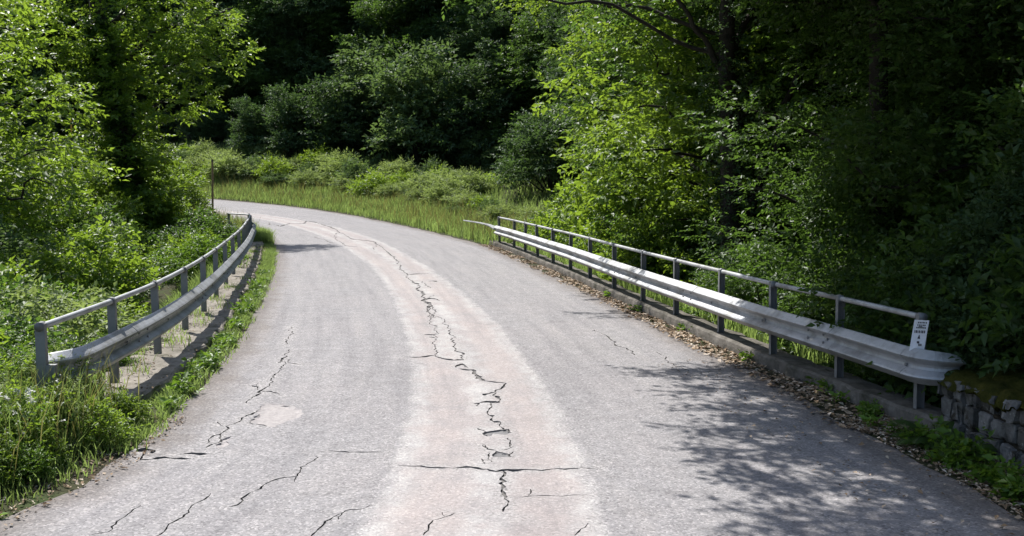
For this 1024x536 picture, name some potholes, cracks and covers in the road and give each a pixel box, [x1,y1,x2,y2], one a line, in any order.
crack [311,505,370,536]
crack [157,493,211,536]
crack [231,451,369,507]
crack [138,327,296,460]
crack [386,251,598,512]
